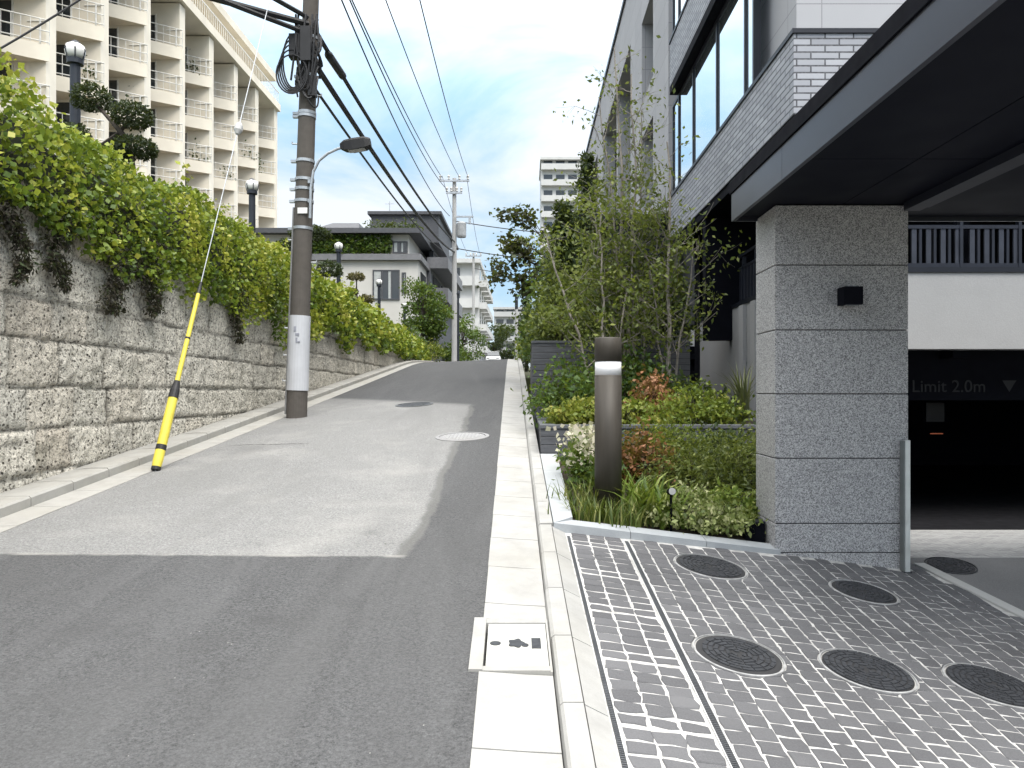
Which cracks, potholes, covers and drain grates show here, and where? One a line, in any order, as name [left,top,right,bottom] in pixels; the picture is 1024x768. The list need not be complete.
manhole cover [674,553,748,580]
manhole cover [924,557,978,575]
manhole cover [942,663,1024,709]
manhole cover [818,648,919,695]
manhole cover [692,634,786,677]
manhole cover [435,432,489,441]
manhole cover [829,579,900,605]
